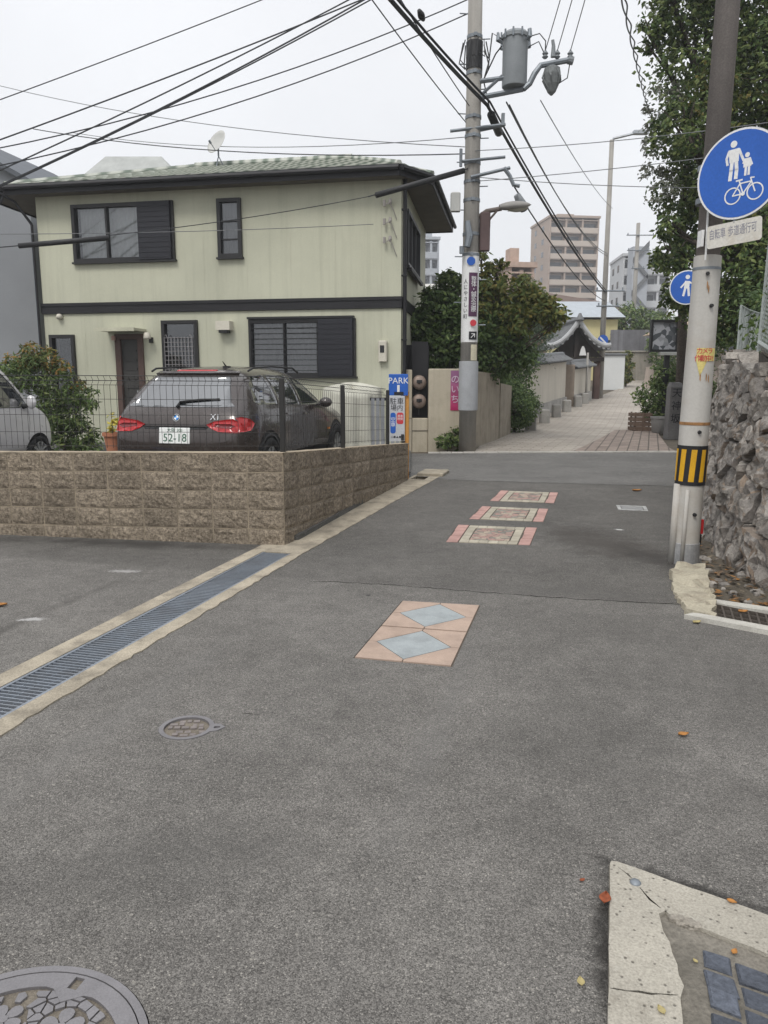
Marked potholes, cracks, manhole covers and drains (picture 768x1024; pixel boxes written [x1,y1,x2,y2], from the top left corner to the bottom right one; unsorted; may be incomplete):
drain grate [714,604,768,626]
manhole cover [159,715,225,740]
drain grate [86,597,208,649]
drain grate [177,564,268,600]
manhole cover [0,966,148,1024]
drain grate [240,552,289,567]
drain grate [0,644,124,719]
